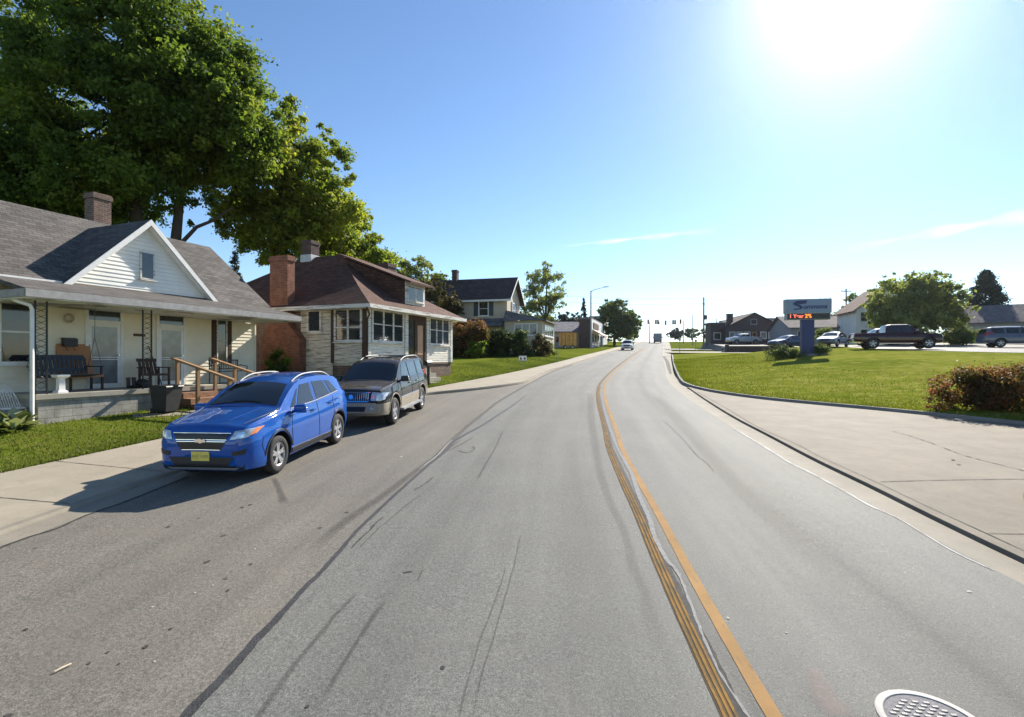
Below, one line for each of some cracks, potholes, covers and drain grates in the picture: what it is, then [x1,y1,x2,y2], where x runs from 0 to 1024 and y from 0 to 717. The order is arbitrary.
manhole cover [874,689,975,717]
